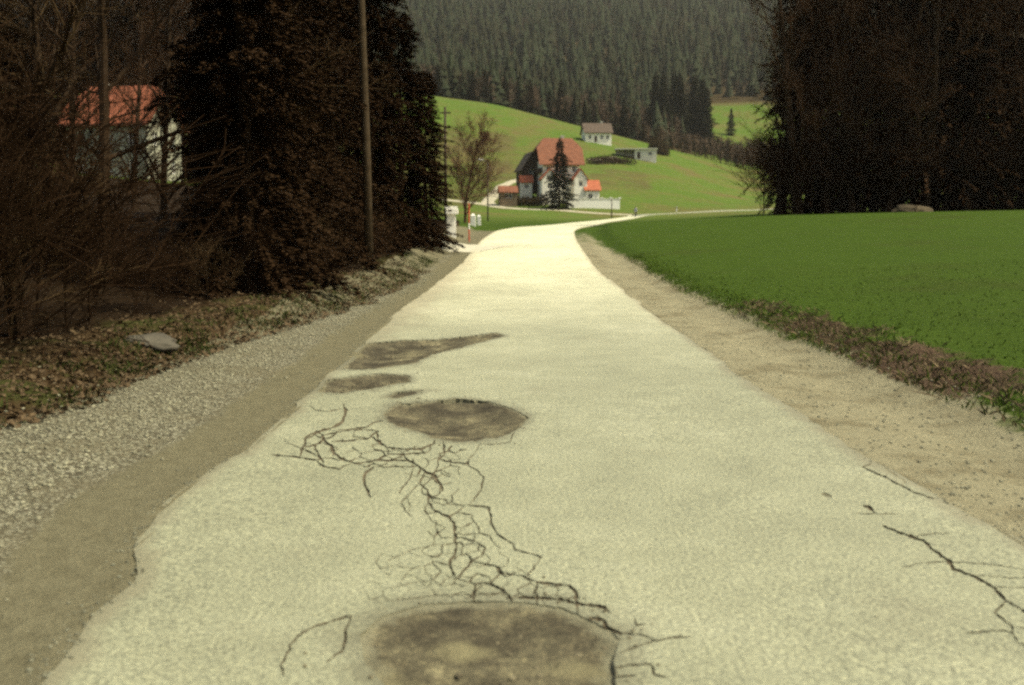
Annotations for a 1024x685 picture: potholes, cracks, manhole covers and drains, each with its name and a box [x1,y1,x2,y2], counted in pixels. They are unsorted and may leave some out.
crack [271,404,692,678]
crack [856,463,1024,645]
